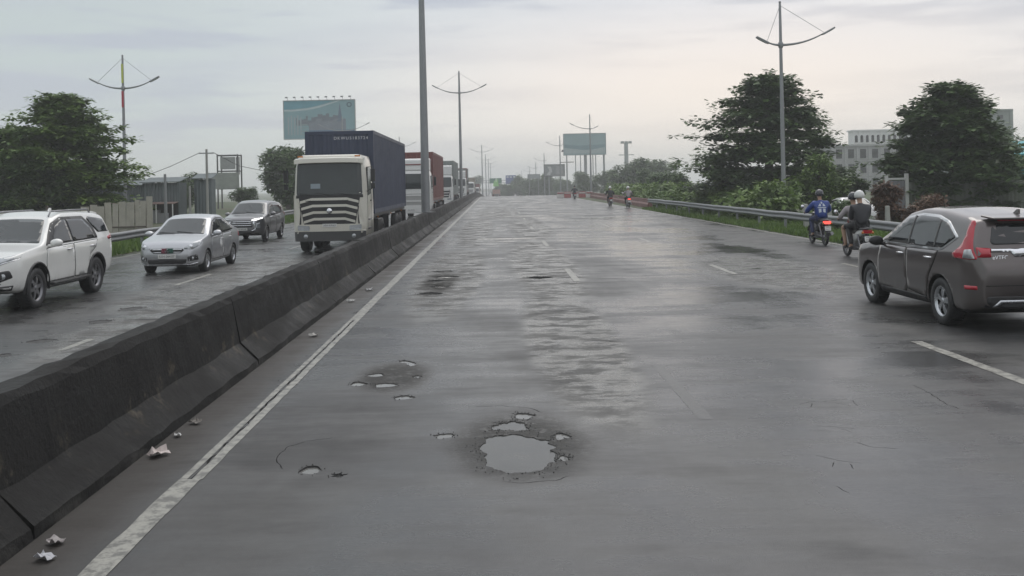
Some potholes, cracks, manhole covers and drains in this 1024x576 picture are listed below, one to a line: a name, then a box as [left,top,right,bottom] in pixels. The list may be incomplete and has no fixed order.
pothole [488,418,536,432]
pothole [551,431,576,441]
pothole [465,431,571,480]
pothole [512,411,535,420]
crack [191,321,353,479]
pothole [298,464,325,476]
